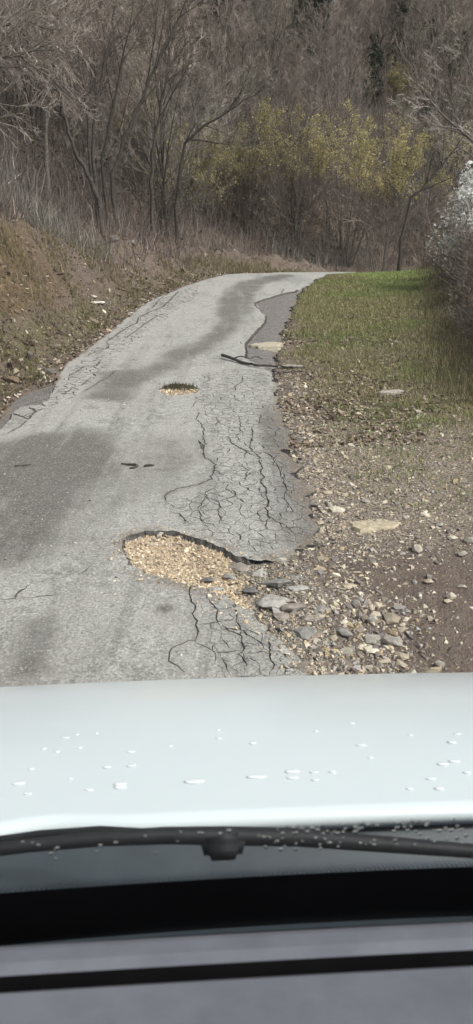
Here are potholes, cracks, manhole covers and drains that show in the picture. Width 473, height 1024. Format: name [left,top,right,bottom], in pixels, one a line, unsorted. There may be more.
pothole [159,381,199,395]
crack [164,368,308,552]
crack [8,287,198,433]
crack [168,585,298,678]
